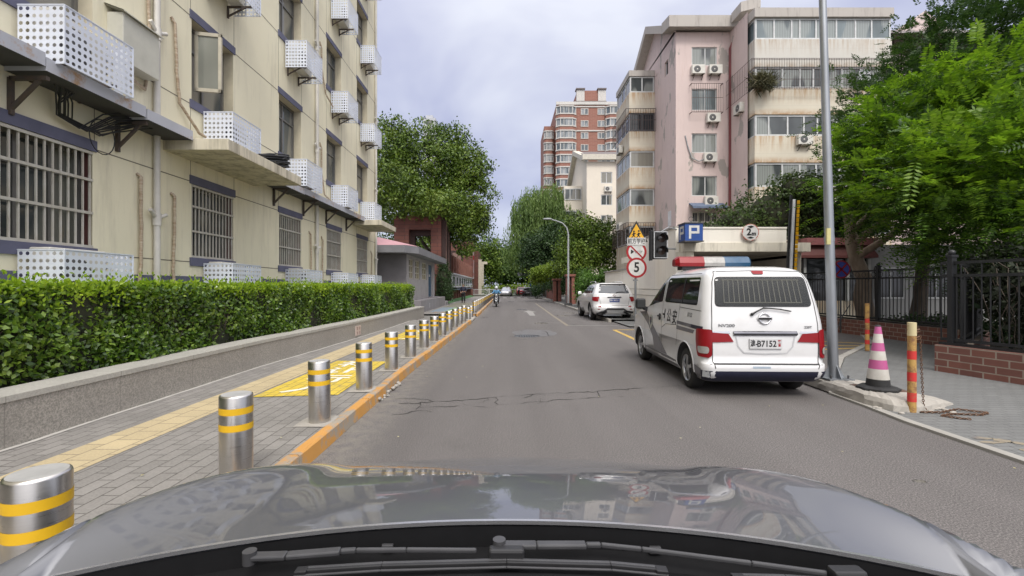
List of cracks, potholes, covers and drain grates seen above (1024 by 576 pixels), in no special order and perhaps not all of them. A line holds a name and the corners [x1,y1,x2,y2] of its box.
crack [394,386,667,415]
